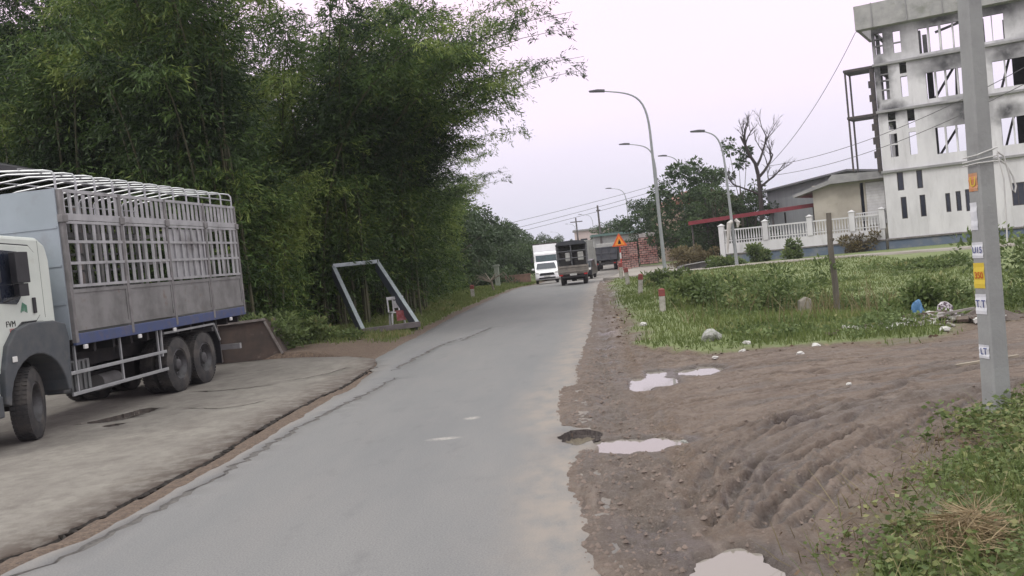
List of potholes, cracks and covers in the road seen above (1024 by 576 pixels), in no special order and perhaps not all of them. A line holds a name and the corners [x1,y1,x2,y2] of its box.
crack [394,327,492,370]
pothole [75,408,158,425]
pothole [557,429,602,445]
